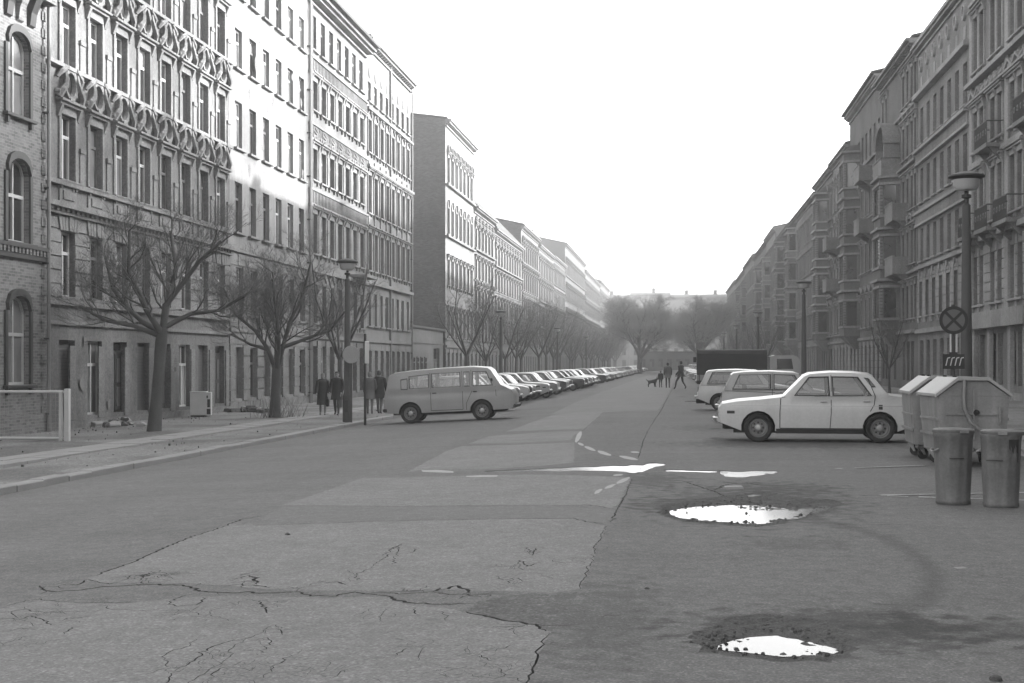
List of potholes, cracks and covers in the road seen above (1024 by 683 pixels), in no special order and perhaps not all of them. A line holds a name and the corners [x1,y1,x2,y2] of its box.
crack [472,547,586,587]
crack [1,515,565,683]
pothole [654,491,849,527]
pothole [682,614,860,663]
